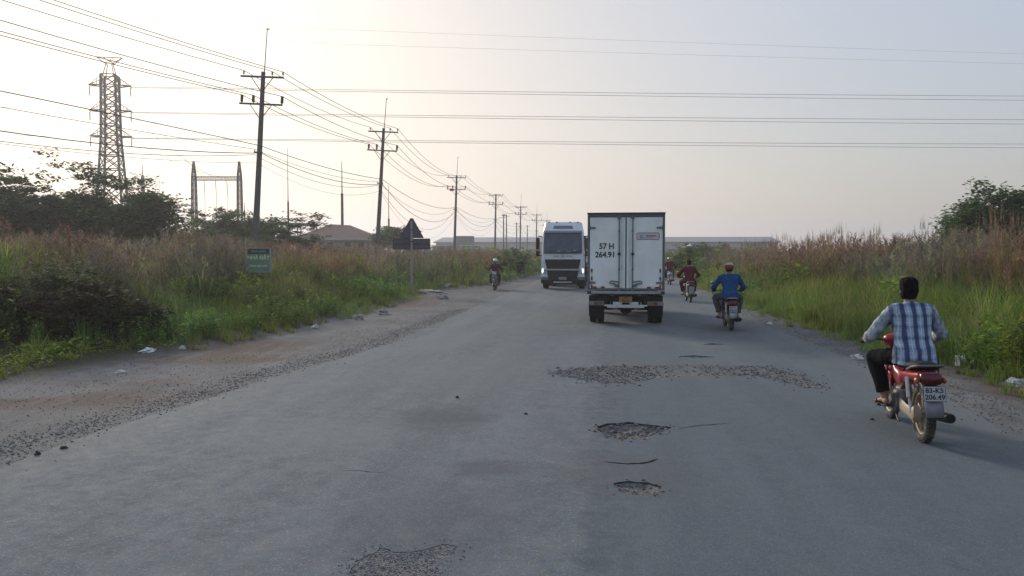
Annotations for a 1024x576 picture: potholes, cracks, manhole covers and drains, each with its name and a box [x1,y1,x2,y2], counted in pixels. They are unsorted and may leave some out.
pothole [588,421,674,442]
pothole [548,364,831,393]
pothole [332,540,471,576]
pothole [604,478,672,496]
